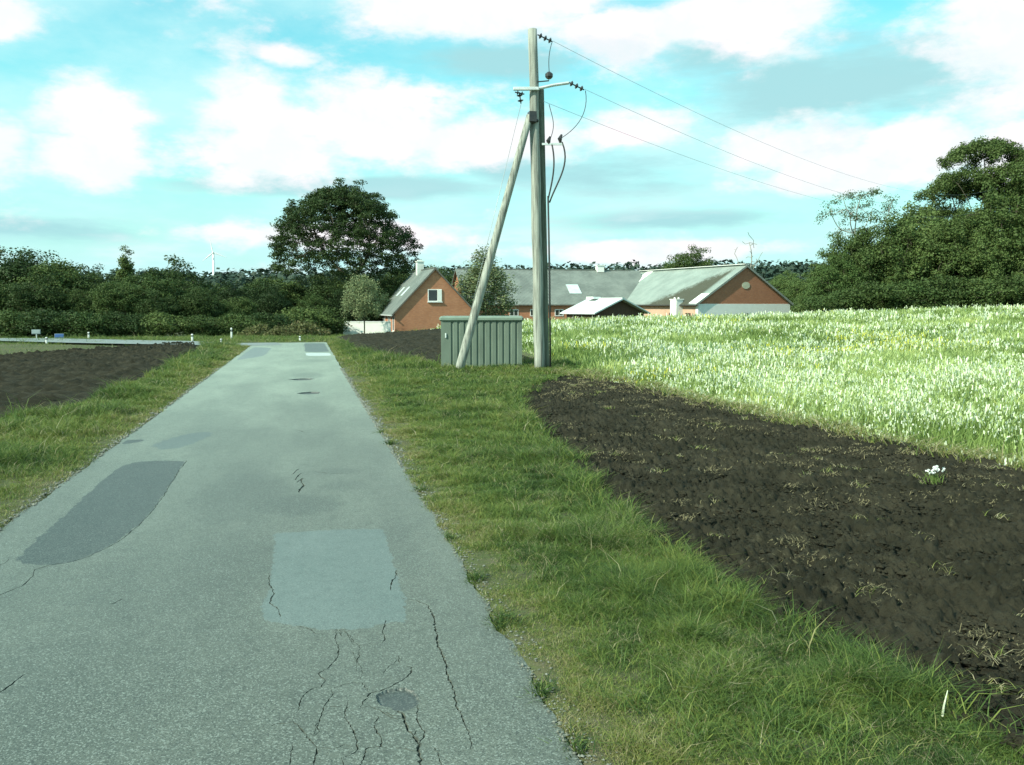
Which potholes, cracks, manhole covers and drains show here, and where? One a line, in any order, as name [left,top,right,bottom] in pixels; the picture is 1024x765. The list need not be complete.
crack [390,570,472,749]
pothole [376,688,421,711]
crack [268,575,281,617]
crack [0,462,186,595]
crack [270,621,442,765]
